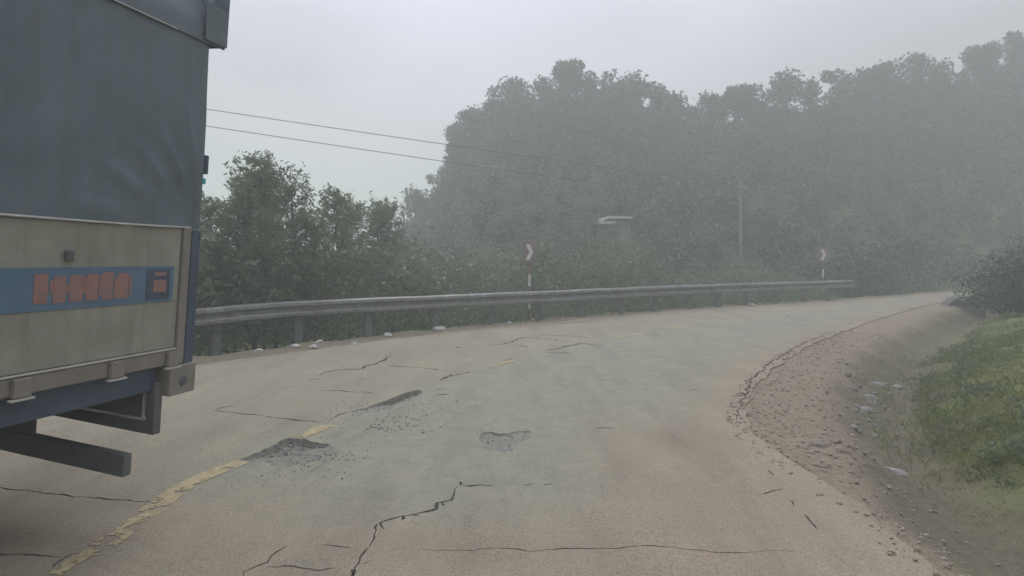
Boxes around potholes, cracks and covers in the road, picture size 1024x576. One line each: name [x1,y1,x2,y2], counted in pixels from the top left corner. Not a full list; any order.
pothole [352,390,422,414]
pothole [479,430,533,452]
crack [243,547,332,576]
crack [311,356,470,395]
crack [455,321,598,362]
crack [0,487,163,502]
crack [328,482,792,576]
pothole [240,438,336,466]
crack [215,405,347,422]
crack [733,339,813,427]
